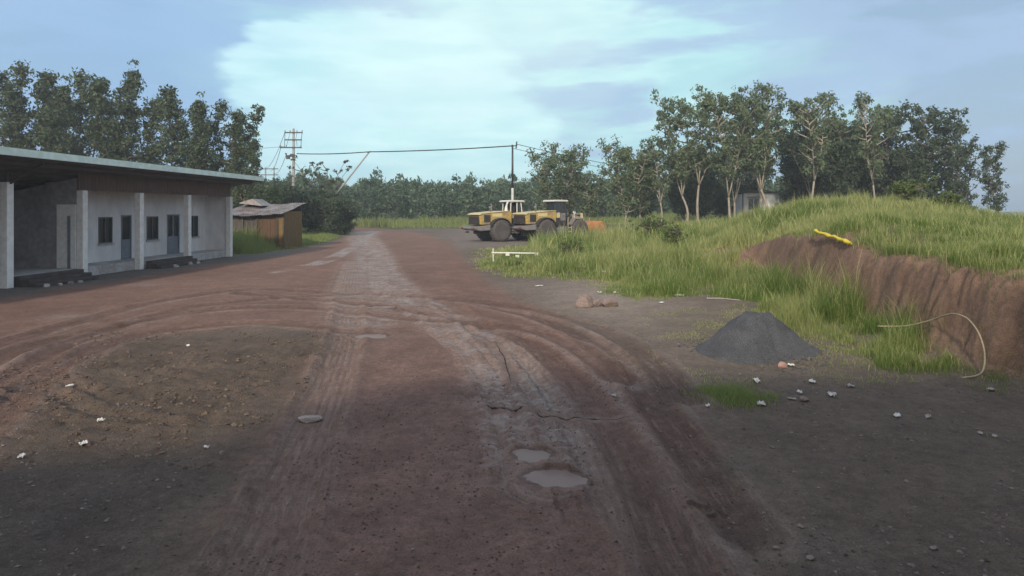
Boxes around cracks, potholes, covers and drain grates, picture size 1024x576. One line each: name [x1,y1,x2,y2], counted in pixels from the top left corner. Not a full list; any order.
pothole [345,330,398,341]
crack [477,339,634,426]
pothole [502,443,563,465]
pothole [506,460,603,493]
